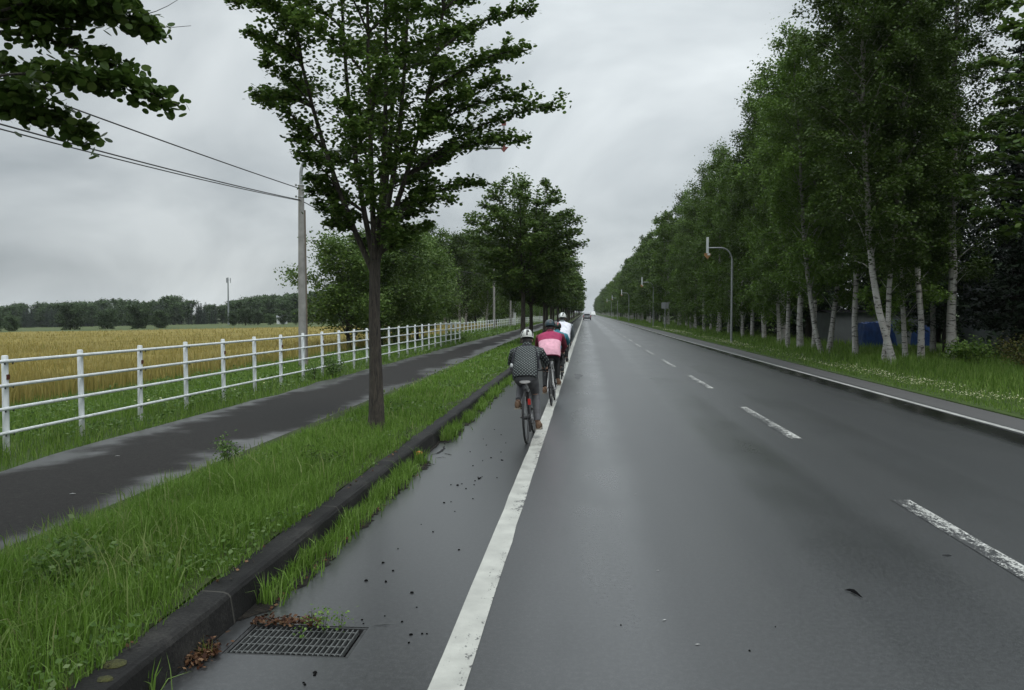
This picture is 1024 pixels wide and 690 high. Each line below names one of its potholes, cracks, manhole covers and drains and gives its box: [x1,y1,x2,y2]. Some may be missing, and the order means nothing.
drain grate [221,624,369,658]
